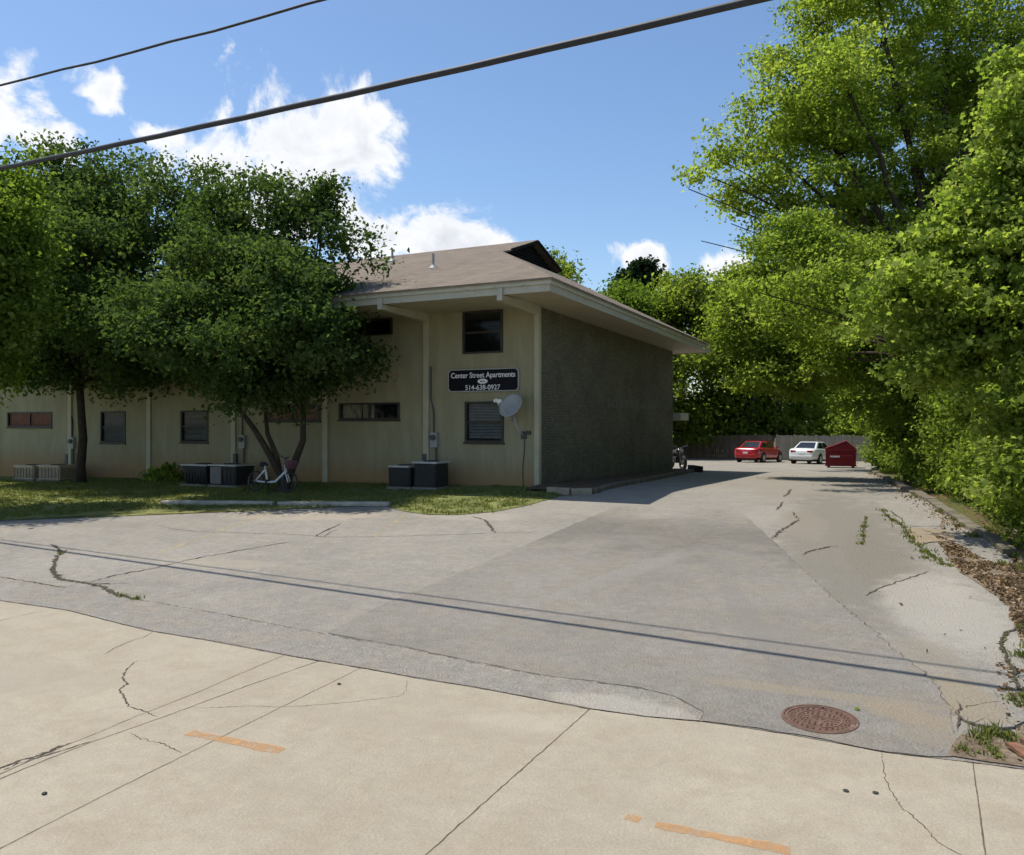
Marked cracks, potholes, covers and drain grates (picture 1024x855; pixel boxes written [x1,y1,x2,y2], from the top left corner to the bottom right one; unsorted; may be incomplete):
crack [766,489,799,538]
crack [105,635,180,752]
manhole cover [781,704,859,734]
crack [881,752,961,855]
crack [952,625,1023,729]
crack [858,507,953,596]
crack [0,741,90,770]
crack [2,516,530,598]
